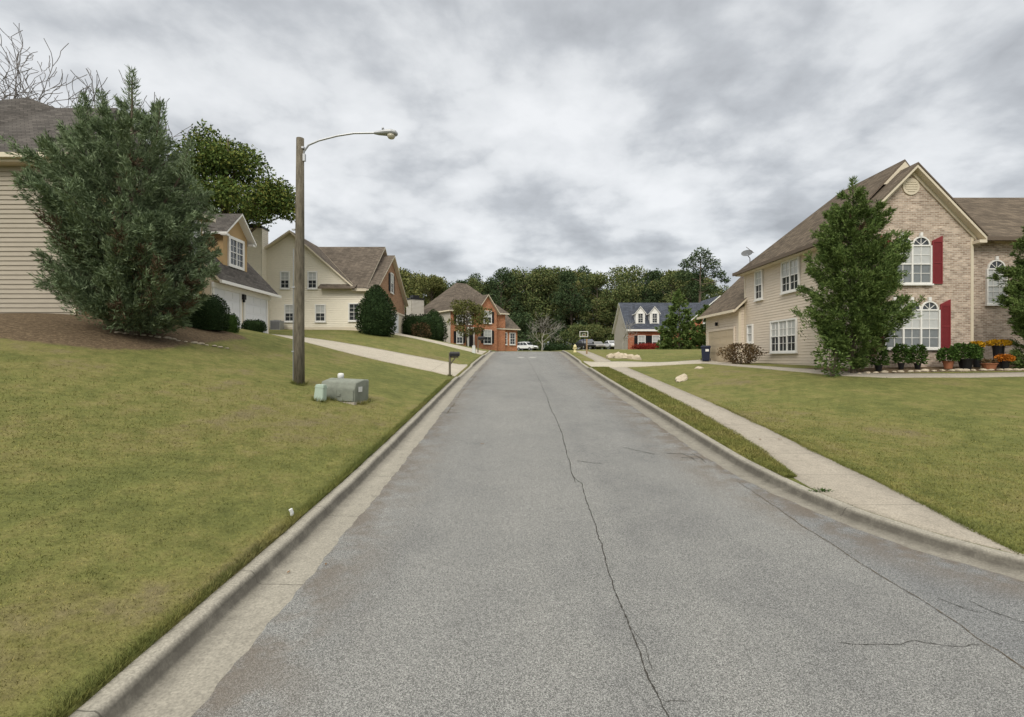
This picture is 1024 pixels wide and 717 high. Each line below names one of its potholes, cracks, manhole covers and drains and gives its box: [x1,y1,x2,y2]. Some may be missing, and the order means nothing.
crack [533,369,689,717]
